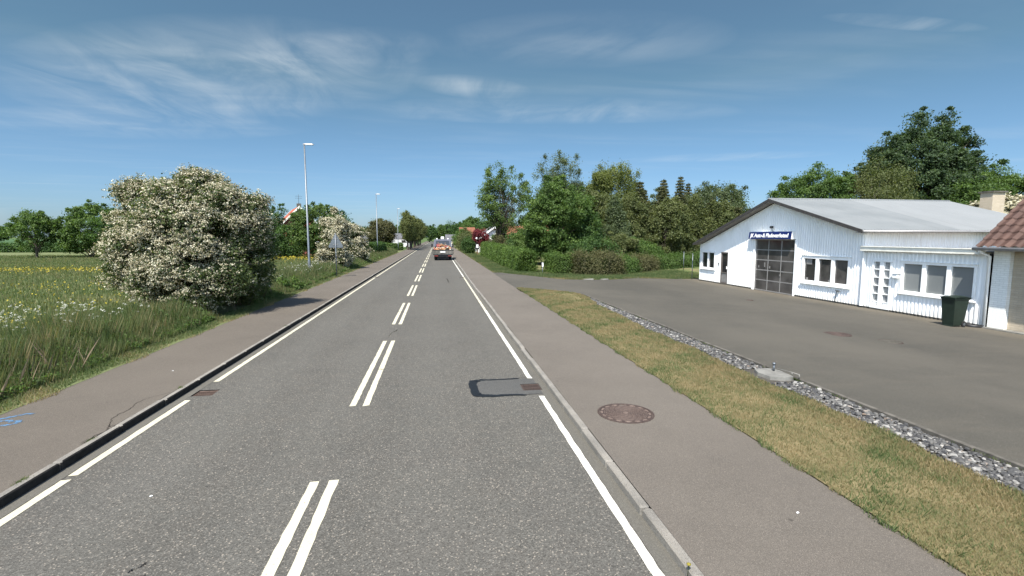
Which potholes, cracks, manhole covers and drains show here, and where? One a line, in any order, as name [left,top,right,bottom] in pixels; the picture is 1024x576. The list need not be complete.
crack [83,390,176,442]
manhole cover [597,403,655,424]
